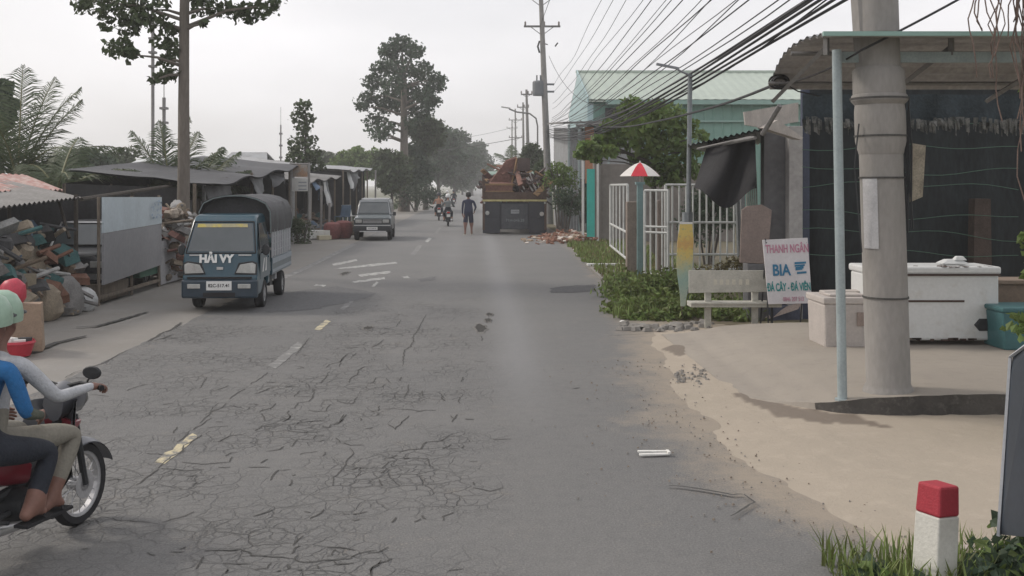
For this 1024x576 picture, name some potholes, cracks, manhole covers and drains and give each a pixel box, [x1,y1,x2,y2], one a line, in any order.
pothole [473,323,489,334]
crack [669,485,755,516]
crack [107,315,426,485]
crack [379,361,482,485]
crack [171,535,392,576]
